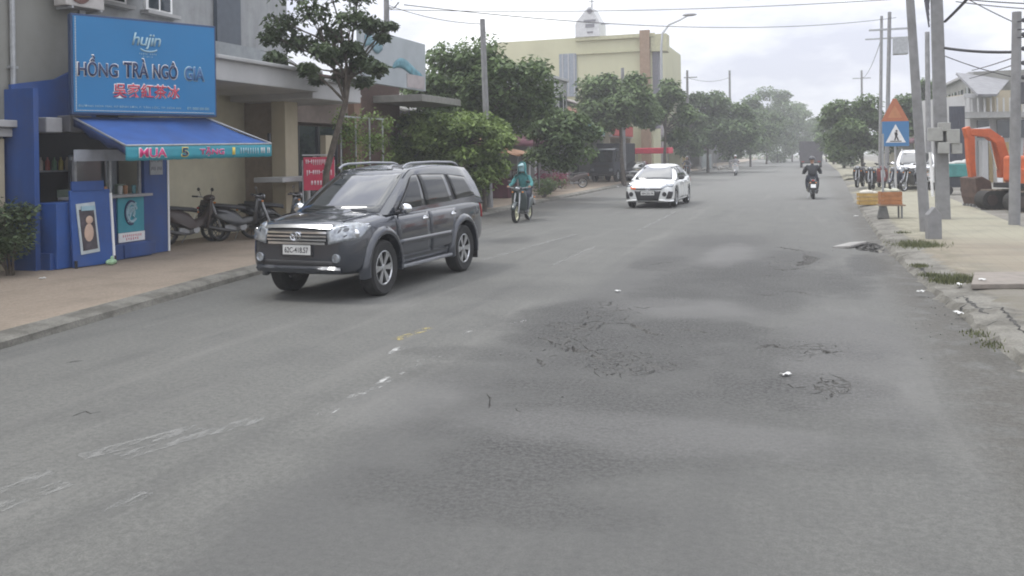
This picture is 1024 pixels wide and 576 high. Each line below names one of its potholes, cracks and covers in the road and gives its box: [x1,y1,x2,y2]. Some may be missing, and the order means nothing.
crack [754,343,845,361]
crack [780,374,852,398]
crack [945,296,1024,333]
crack [536,302,707,379]
crack [755,247,812,296]
